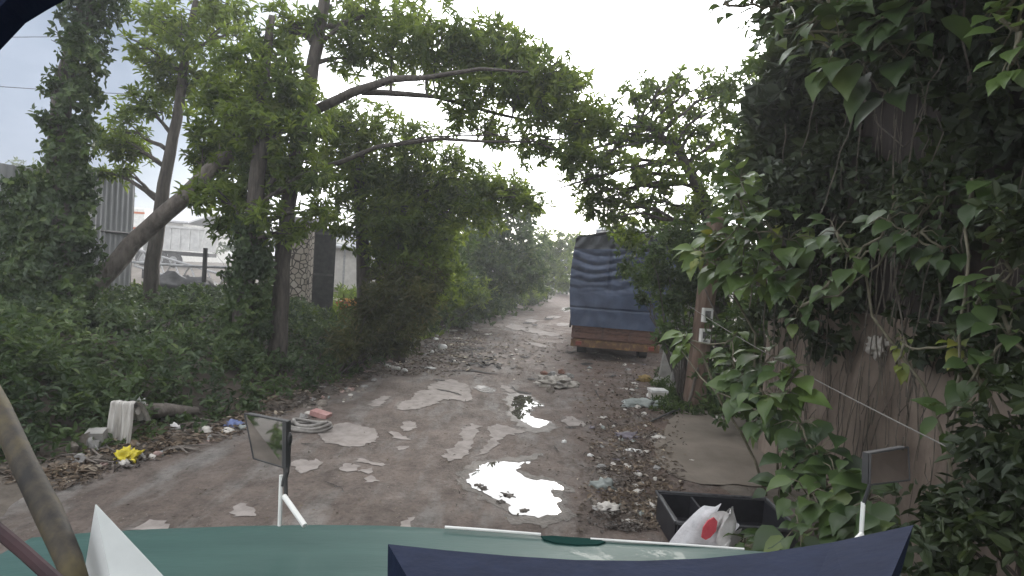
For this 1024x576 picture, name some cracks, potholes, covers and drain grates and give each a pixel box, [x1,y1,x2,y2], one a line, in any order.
pothole [502,392,560,433]
pothole [455,453,578,528]
